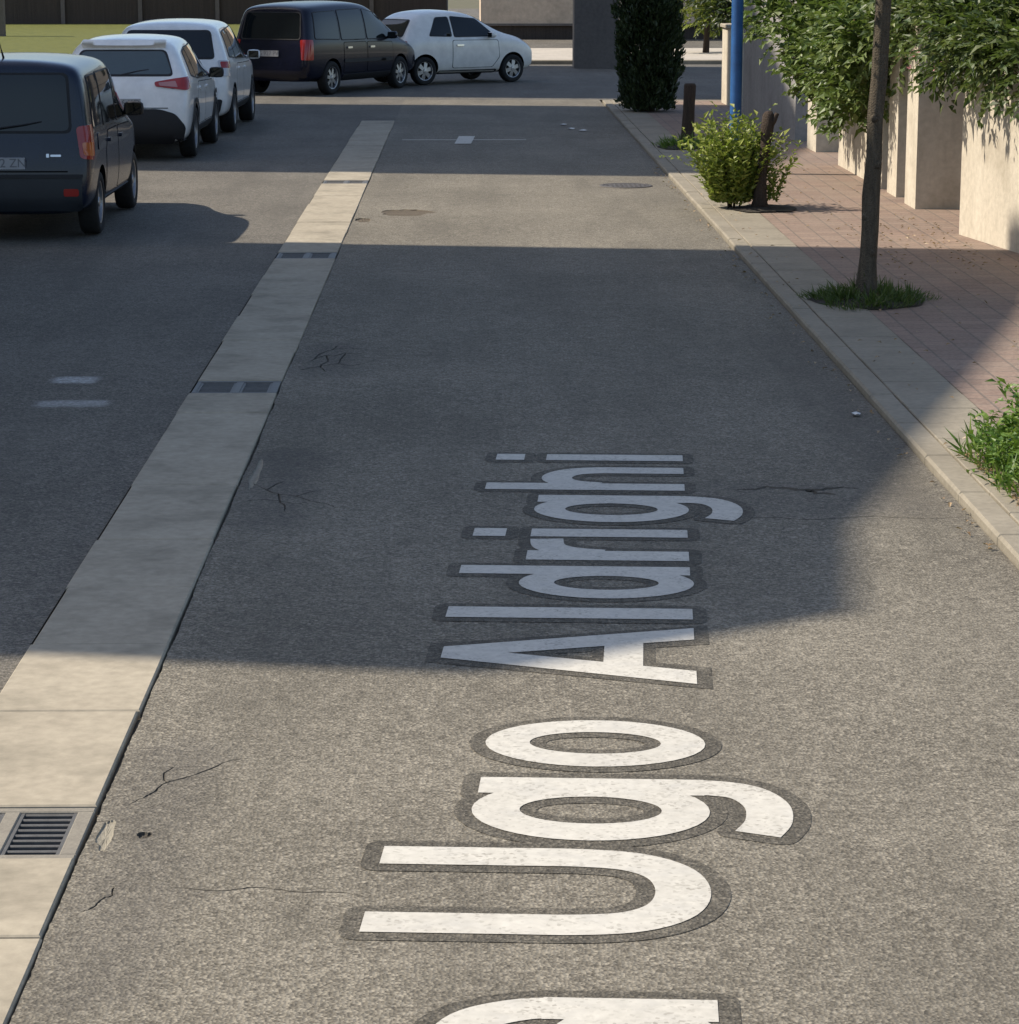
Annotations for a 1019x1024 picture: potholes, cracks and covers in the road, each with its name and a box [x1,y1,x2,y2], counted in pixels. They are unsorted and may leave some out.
crack [248,481,336,511]
crack [737,486,858,495]
crack [126,758,248,806]
drain grate [0,808,97,865]
drain grate [191,381,282,395]
crack [83,886,115,912]
crack [166,886,365,897]
crack [301,346,365,372]
